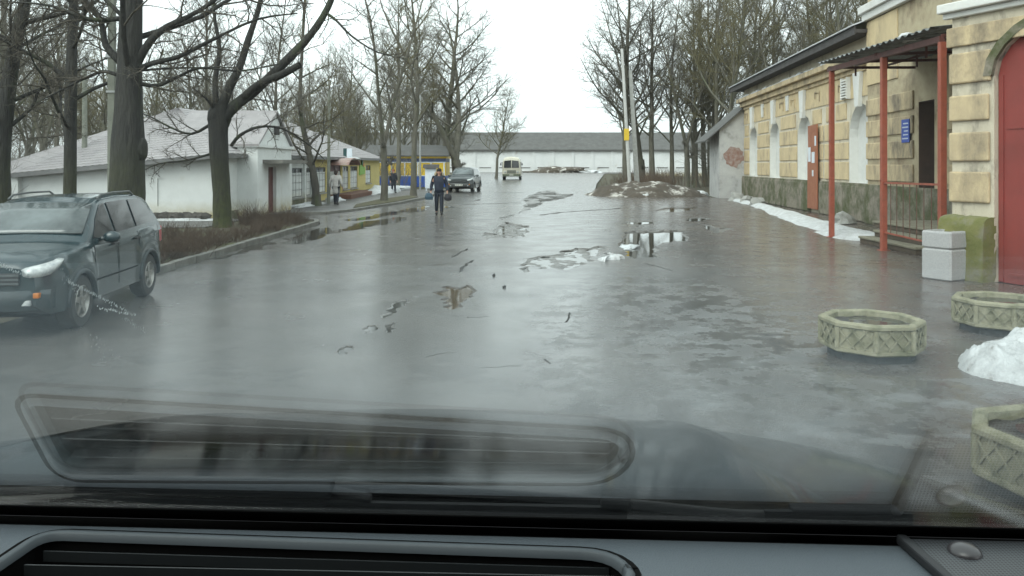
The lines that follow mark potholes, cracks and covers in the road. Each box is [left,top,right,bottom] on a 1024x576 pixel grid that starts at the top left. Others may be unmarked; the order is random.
pothole [380,299,409,318]
pothole [618,230,689,259]
pothole [519,246,610,273]
pothole [499,191,578,220]
pothole [482,222,529,239]
pothole [433,285,477,309]
